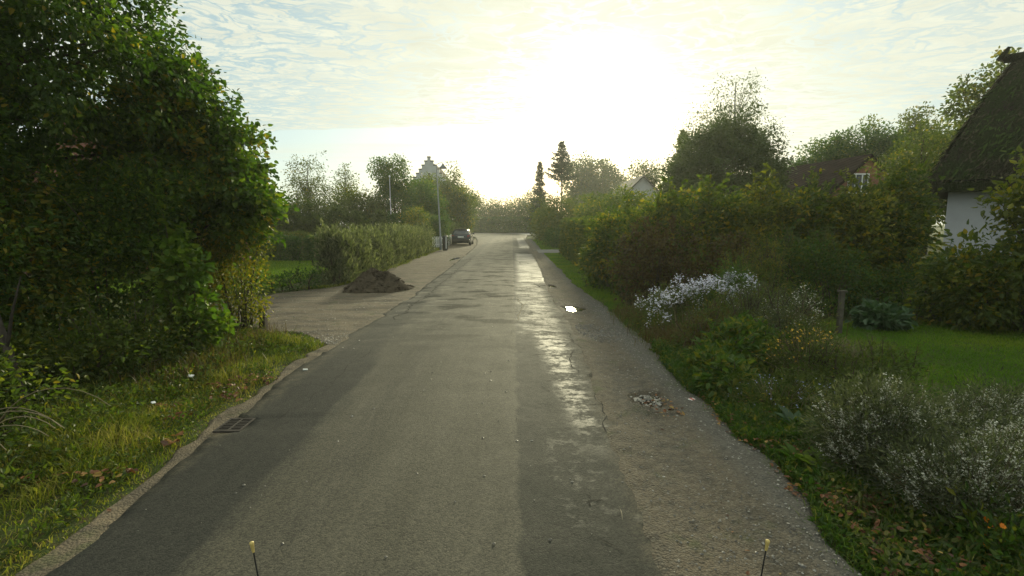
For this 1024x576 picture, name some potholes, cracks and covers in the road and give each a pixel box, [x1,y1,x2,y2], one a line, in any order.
crack [542,334,607,433]
pothole [625,390,668,411]
drain grate [213,418,256,433]
